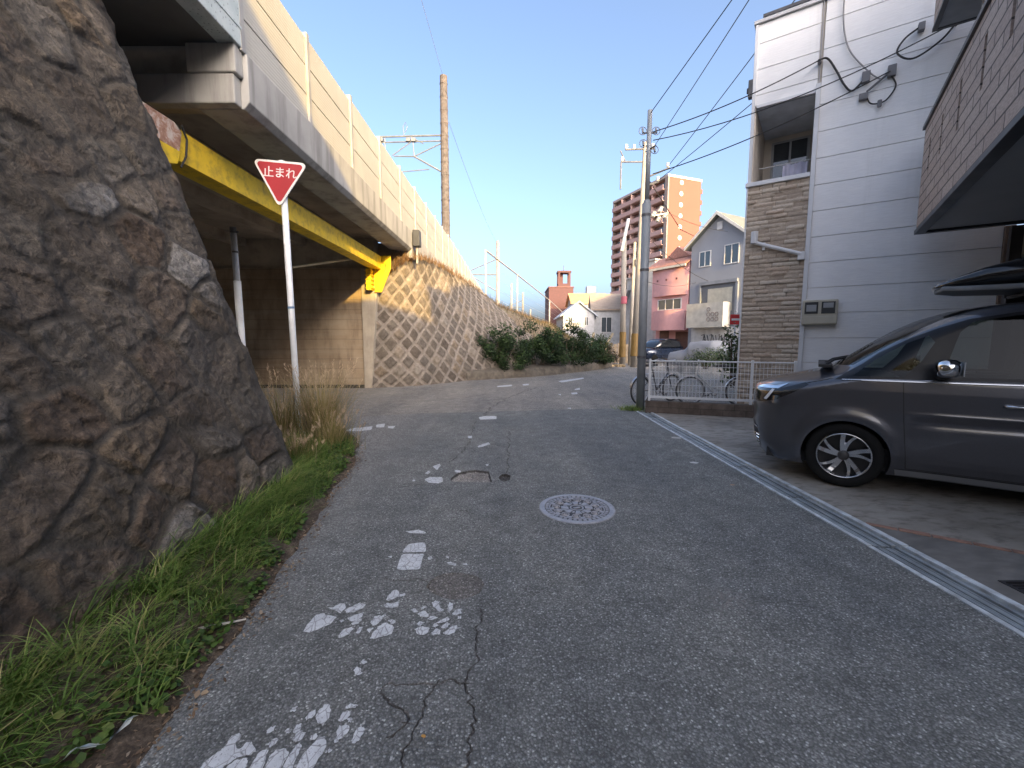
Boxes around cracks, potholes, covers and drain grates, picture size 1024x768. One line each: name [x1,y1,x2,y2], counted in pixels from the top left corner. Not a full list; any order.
manhole cover [539,494,616,524]
crack [378,608,484,768]
pothole [451,470,492,482]
